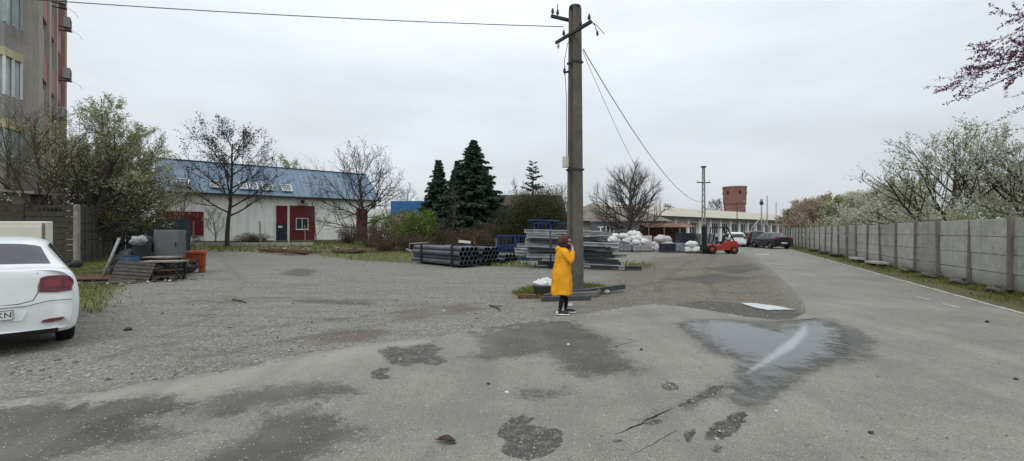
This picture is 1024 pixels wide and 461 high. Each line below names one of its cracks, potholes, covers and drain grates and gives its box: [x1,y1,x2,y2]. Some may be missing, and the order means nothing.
pothole [495,414,565,461]
pothole [660,382,680,390]
pothole [703,411,749,441]
pothole [377,342,450,367]
crack [614,408,676,455]
pothole [370,367,391,380]
pothole [677,384,725,407]
